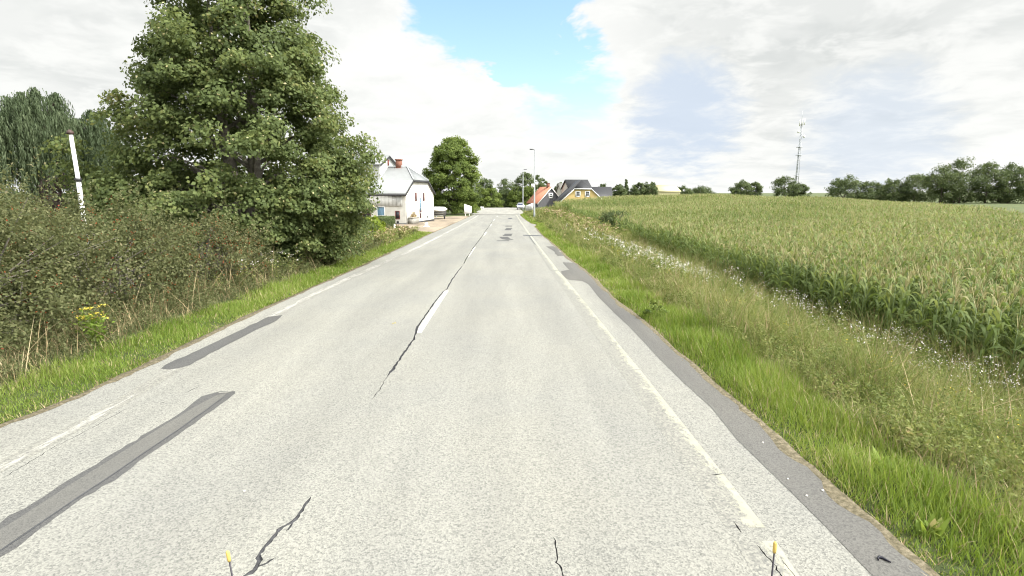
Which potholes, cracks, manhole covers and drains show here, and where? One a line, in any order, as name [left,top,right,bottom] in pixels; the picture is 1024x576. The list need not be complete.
crack [243,497,311,576]
crack [371,225,490,401]
